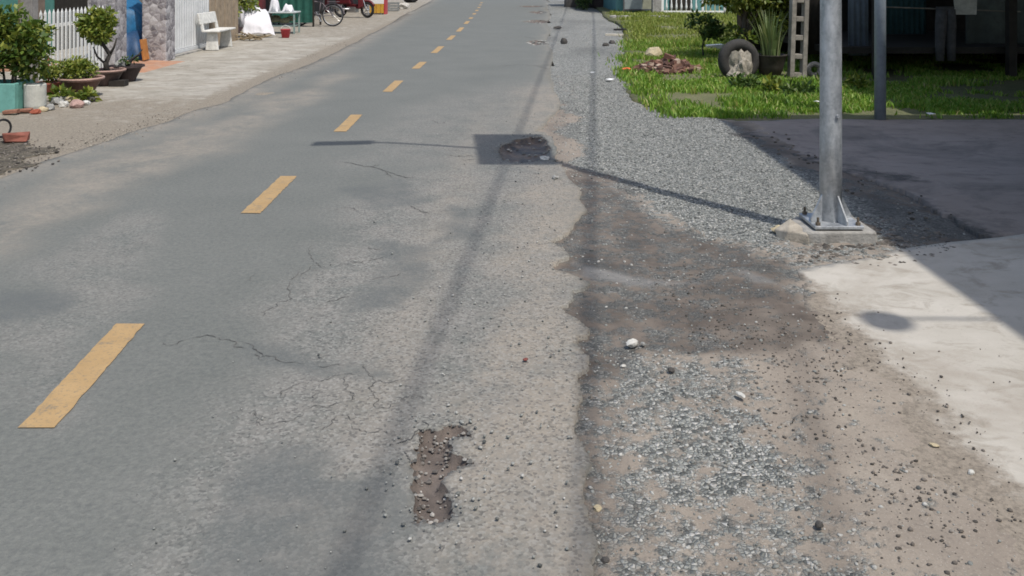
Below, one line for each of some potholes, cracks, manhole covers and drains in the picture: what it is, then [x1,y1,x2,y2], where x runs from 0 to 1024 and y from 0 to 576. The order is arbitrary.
pothole [498,137,551,163]
crack [161,335,302,364]
crack [254,364,424,434]
pothole [410,424,474,527]
